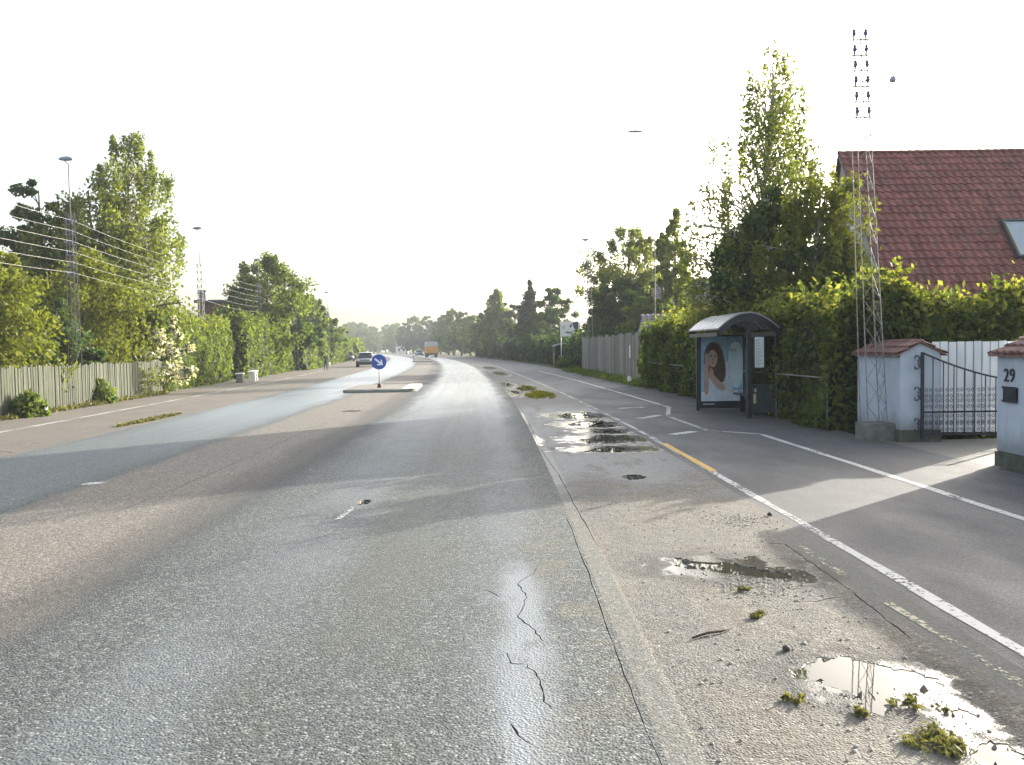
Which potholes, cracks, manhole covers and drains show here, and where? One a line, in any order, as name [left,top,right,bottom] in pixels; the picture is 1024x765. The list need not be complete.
pothole [789,655,944,717]
crack [773,543,910,638]
pothole [577,434,641,444]
crack [520,407,662,765]
crack [483,569,553,744]
pothole [670,556,794,580]
pothole [568,420,616,428]
pothole [969,740,1024,765]
